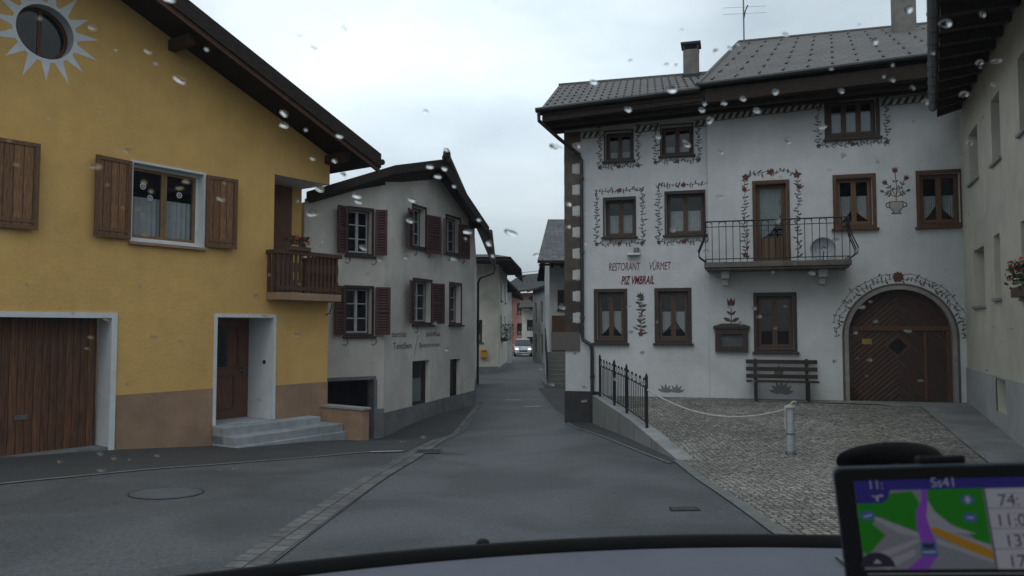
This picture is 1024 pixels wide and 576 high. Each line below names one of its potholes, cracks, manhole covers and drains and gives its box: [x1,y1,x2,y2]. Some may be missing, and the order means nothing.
manhole cover [127,487,204,499]
